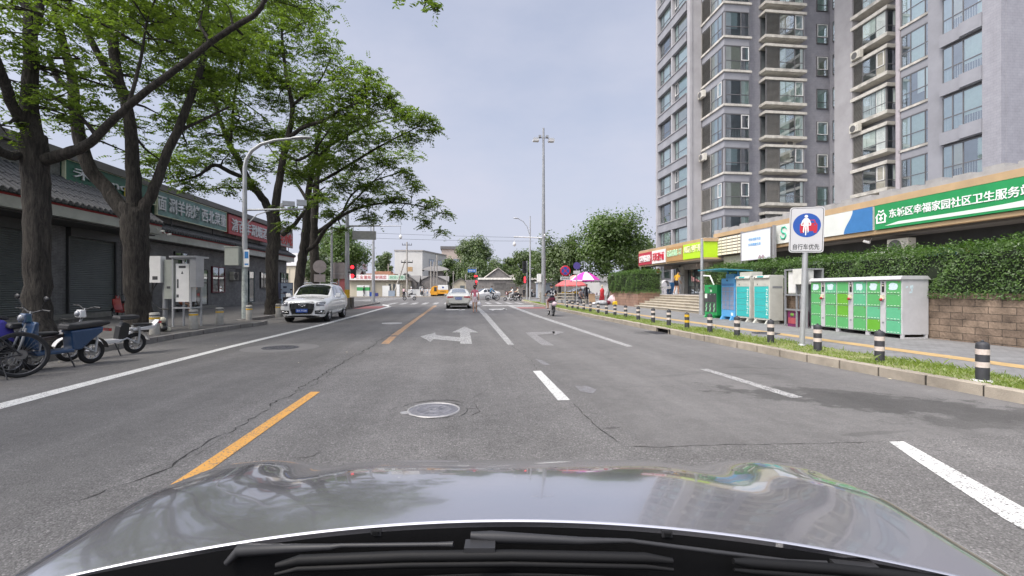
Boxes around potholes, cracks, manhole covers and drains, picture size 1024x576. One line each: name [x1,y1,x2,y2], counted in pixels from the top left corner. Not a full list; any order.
crack [77,317,416,501]
crack [574,404,883,447]
manhole cover [400,402,460,418]
